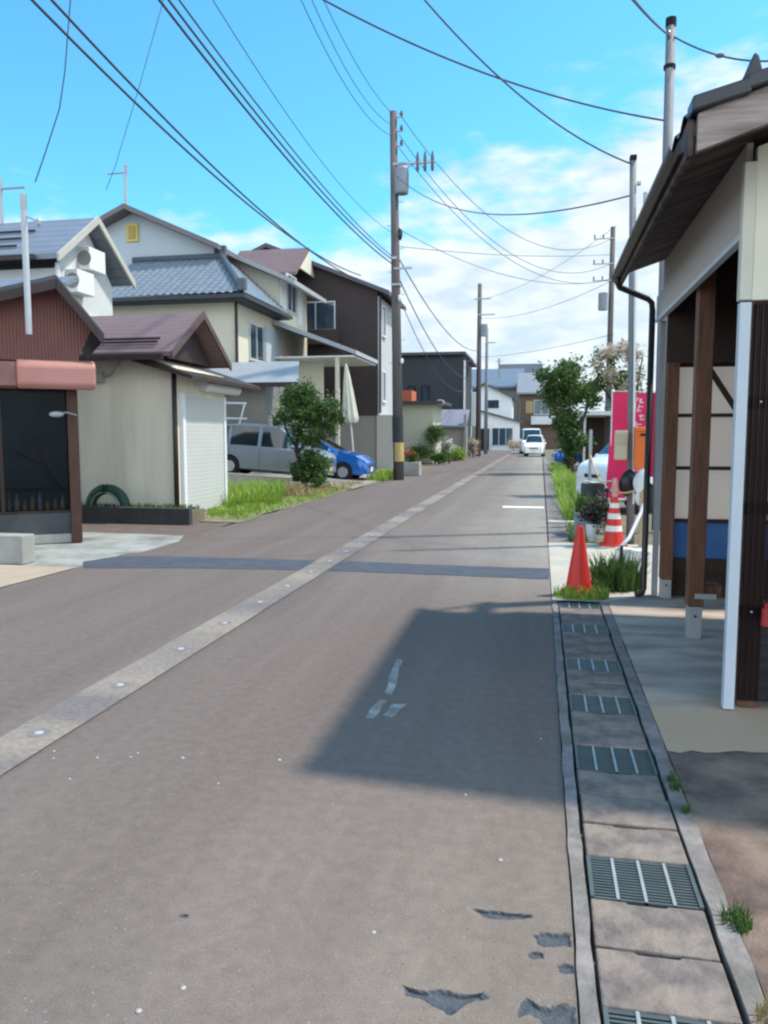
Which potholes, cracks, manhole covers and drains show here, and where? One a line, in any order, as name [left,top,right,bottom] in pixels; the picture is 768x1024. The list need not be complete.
drain grate [559,602,601,610]
pothole [401,984,493,1016]
pothole [471,908,535,920]
drain grate [561,623,609,635]
drain grate [574,744,658,777]
pothole [556,962,574,974]
drain grate [565,658,623,674]
drain grate [586,855,704,912]
pothole [515,997,578,1024]
pothole [527,951,545,960]
drain grate [569,693,637,719]
pothole [531,932,573,947]
